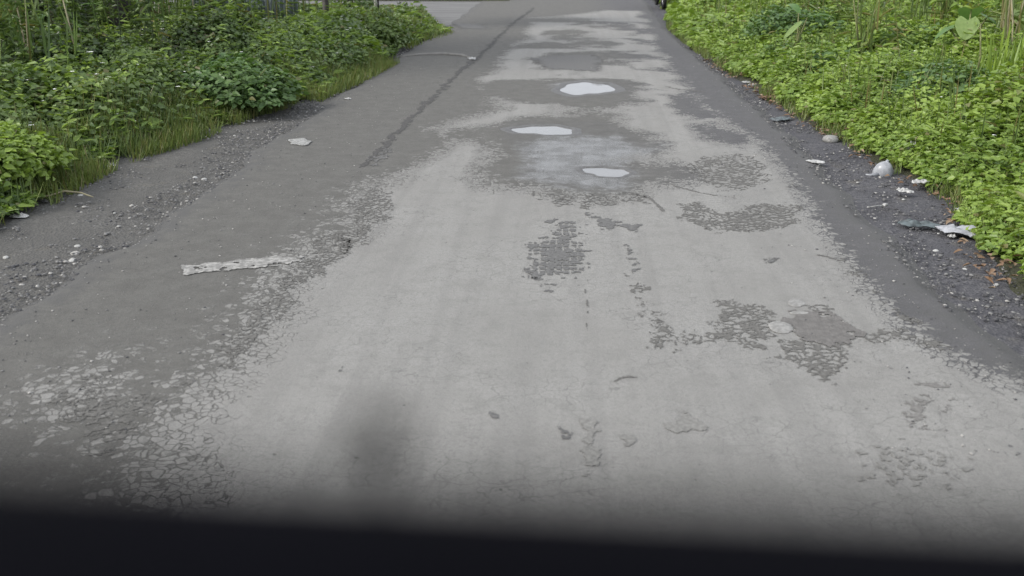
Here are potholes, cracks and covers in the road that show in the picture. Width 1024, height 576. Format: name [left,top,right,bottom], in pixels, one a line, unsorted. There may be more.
pothole [500,124,582,136]
crack [217,186,395,368]
pothole [522,218,592,280]
pothole [574,166,637,178]
crack [624,254,951,385]
crack [47,371,193,456]
pothole [551,80,625,97]
